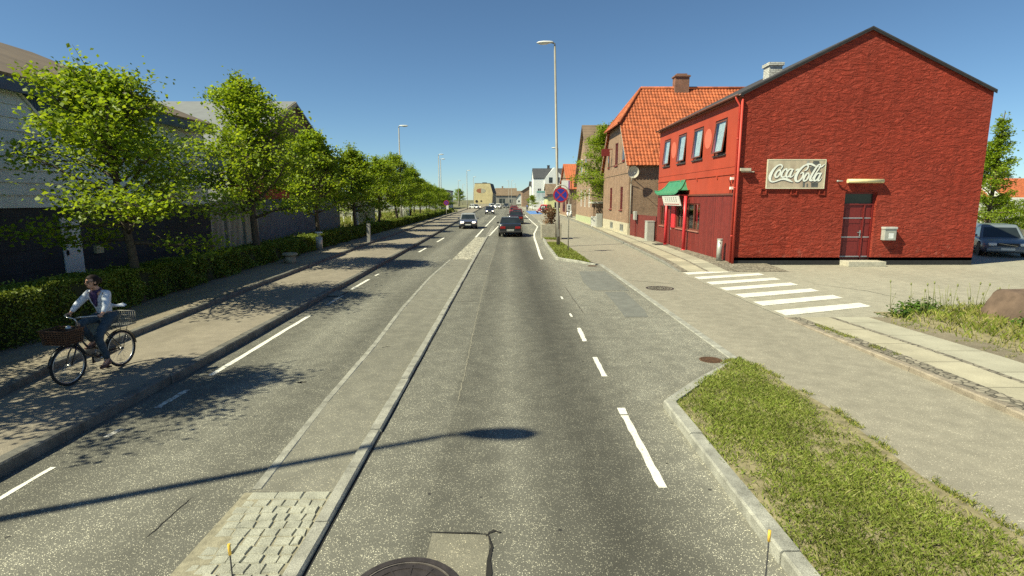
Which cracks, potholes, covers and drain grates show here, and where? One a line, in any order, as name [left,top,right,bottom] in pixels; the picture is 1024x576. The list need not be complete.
manhole cover [361,557,458,576]
